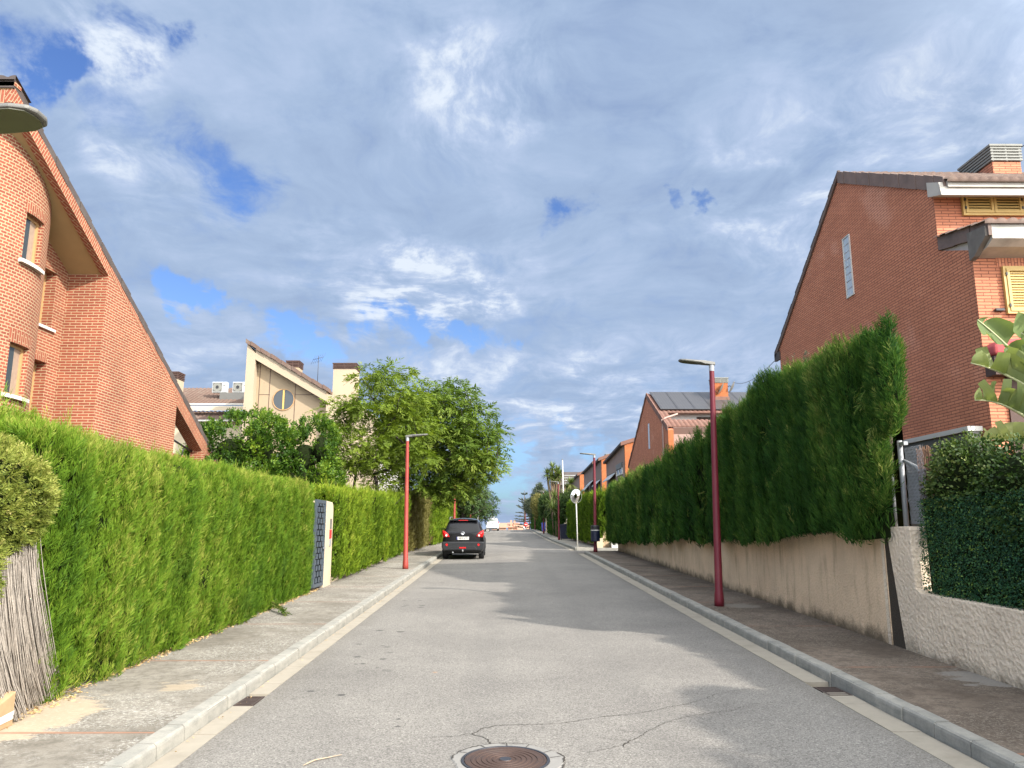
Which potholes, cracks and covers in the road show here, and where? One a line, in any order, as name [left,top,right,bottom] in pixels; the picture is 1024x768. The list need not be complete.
crack [418,681,792,758]
manhole cover [451,743,566,768]
drain grate [233,696,265,706]
drain grate [813,687,853,696]
